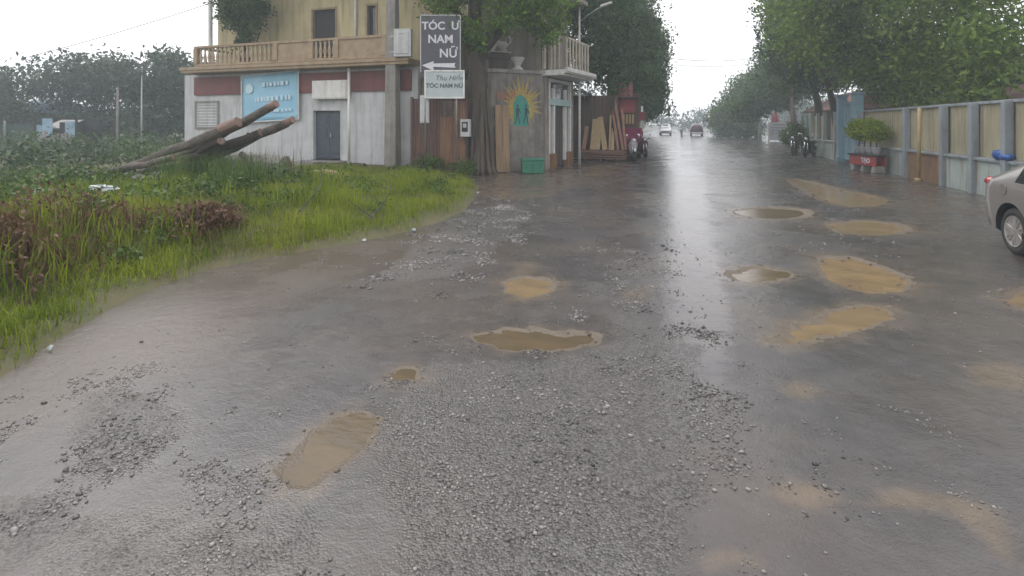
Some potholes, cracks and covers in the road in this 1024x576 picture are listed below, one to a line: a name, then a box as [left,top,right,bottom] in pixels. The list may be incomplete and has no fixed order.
pothole [725,205,816,219]
pothole [999,286,1024,308]
pothole [822,219,921,237]
pothole [263,408,383,490]
pothole [716,263,800,284]
pothole [764,304,903,346]
pothole [383,366,423,383]
pothole [469,326,610,354]
pothole [784,179,889,209]
pothole [809,253,920,297]
pothole [500,275,561,299]
